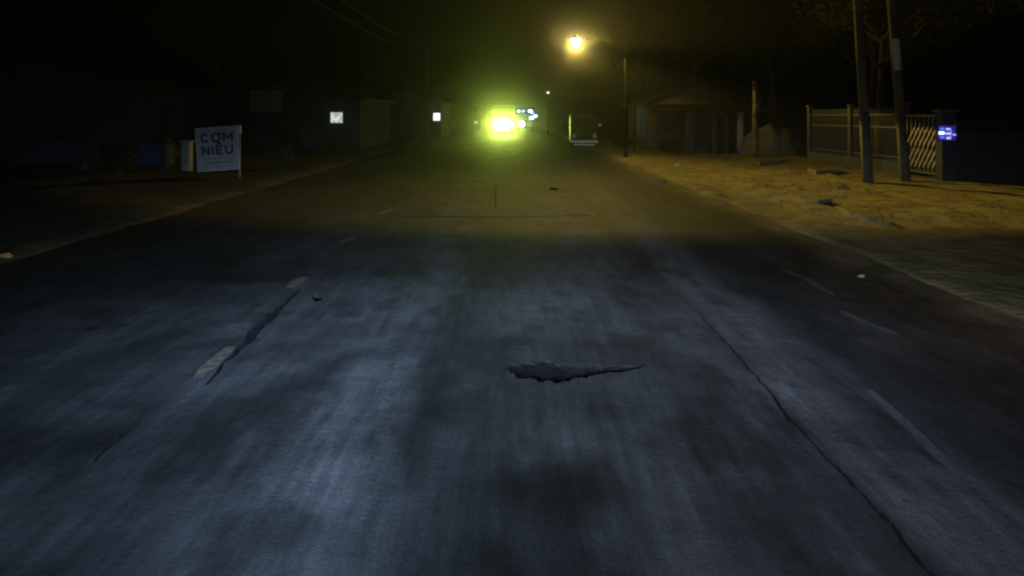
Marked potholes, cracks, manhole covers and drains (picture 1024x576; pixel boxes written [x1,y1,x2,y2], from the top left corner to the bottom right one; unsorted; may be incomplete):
crack [206,288,303,385]
crack [699,314,936,576]
crack [94,422,141,462]
pothole [506,360,644,383]
